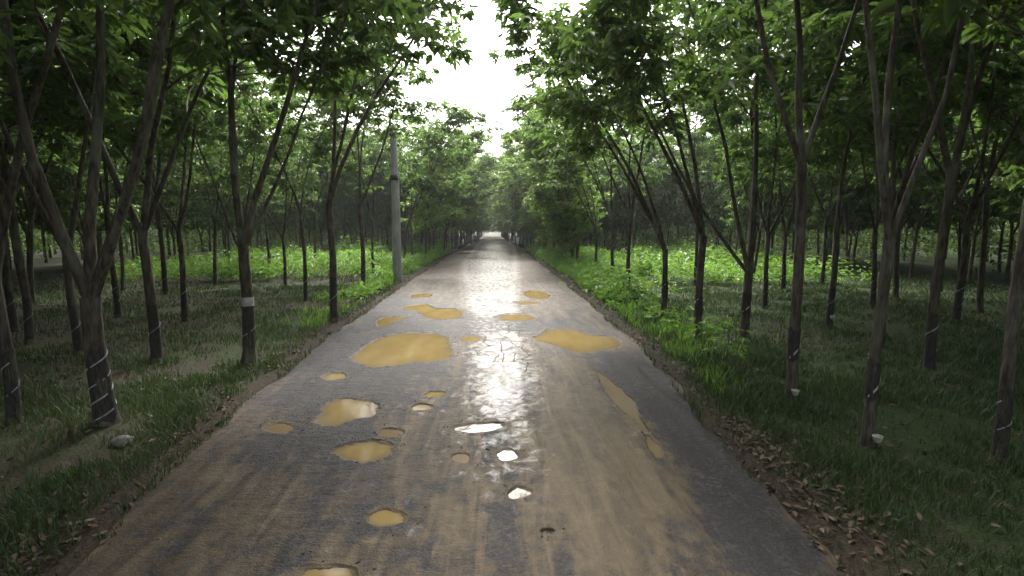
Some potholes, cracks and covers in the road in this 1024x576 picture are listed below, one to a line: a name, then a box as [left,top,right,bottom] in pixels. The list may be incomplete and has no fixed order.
pothole [451,421,505,433]
crack [475,325,531,372]
pothole [293,563,359,576]
pothole [532,328,622,353]
pothole [321,372,347,380]
pothole [449,451,472,464]
pothole [349,332,454,367]
pothole [523,290,552,299]
pothole [645,434,664,458]
pothole [596,370,651,434]
pothole [401,303,465,320]
pothole [375,316,408,327]
